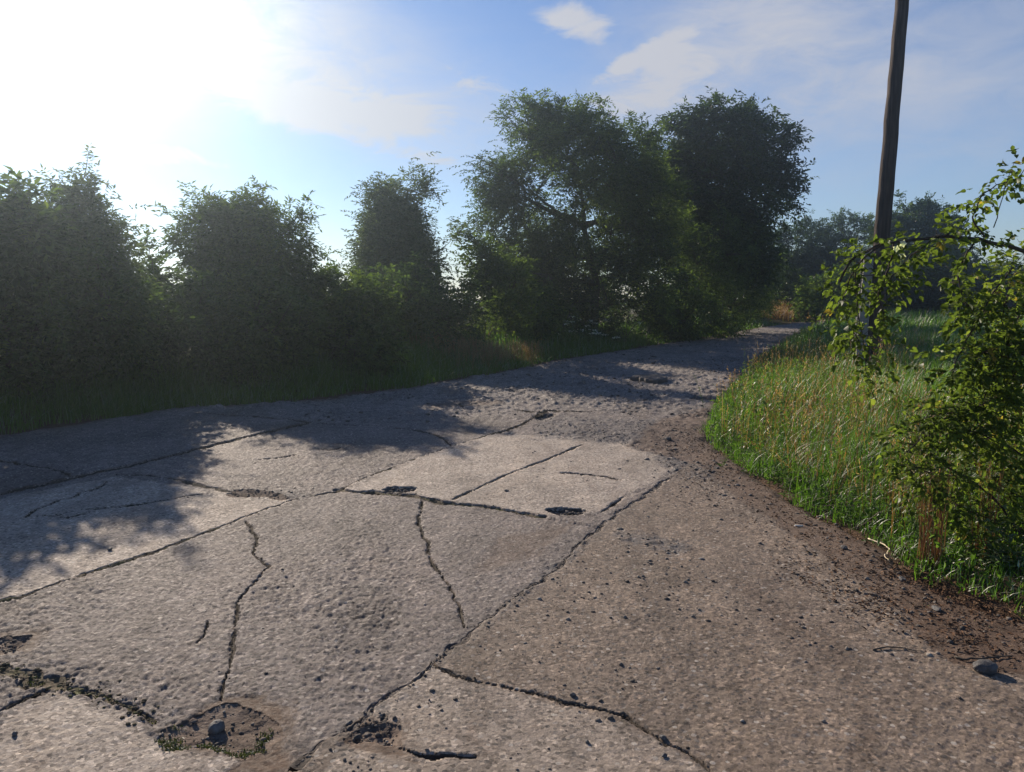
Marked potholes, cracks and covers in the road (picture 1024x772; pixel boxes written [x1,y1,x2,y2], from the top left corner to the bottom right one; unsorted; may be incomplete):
crack [432,664,710,772]
crack [0,658,173,726]
crack [0,460,204,519]
pothole [384,487,416,496]
crack [416,500,468,628]
pothole [153,704,282,759]
pothole [225,489,294,501]
crack [217,523,271,700]
pothole [343,722,403,746]
pothole [546,508,586,516]
crack [560,472,626,512]
crack [486,409,592,436]
